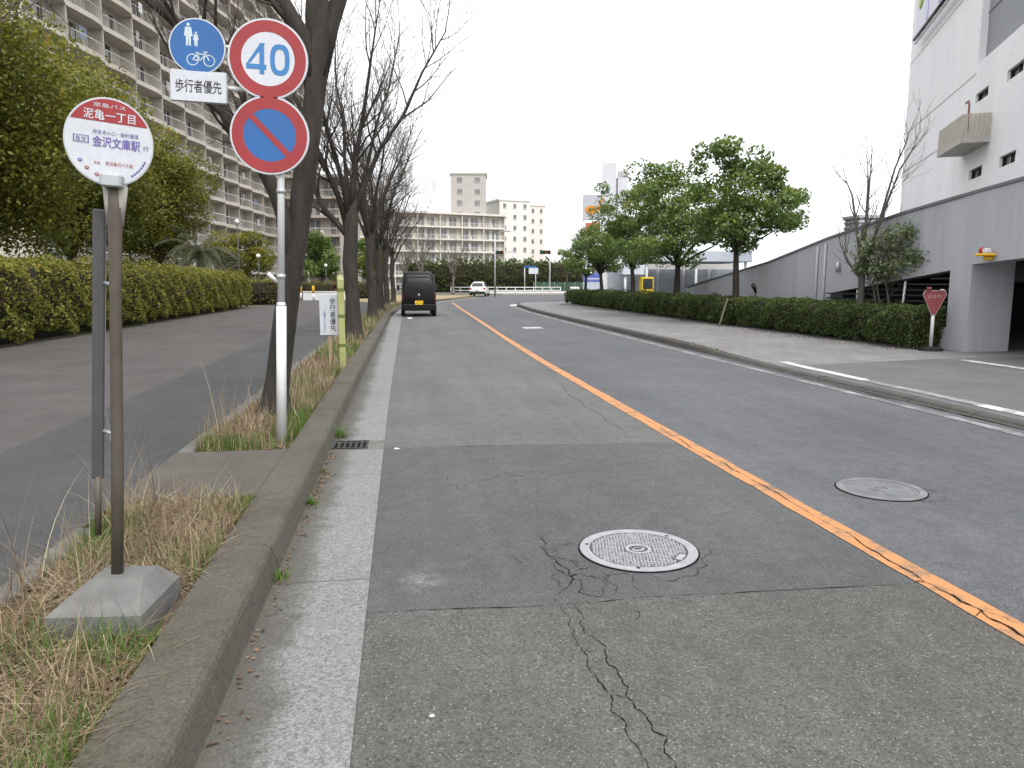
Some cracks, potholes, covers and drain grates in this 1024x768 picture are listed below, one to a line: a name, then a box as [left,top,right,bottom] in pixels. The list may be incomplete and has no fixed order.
crack [506,534,711,768]
manhole cover [835,478,929,502]
drain grate [330,440,385,451]
manhole cover [578,529,700,573]
